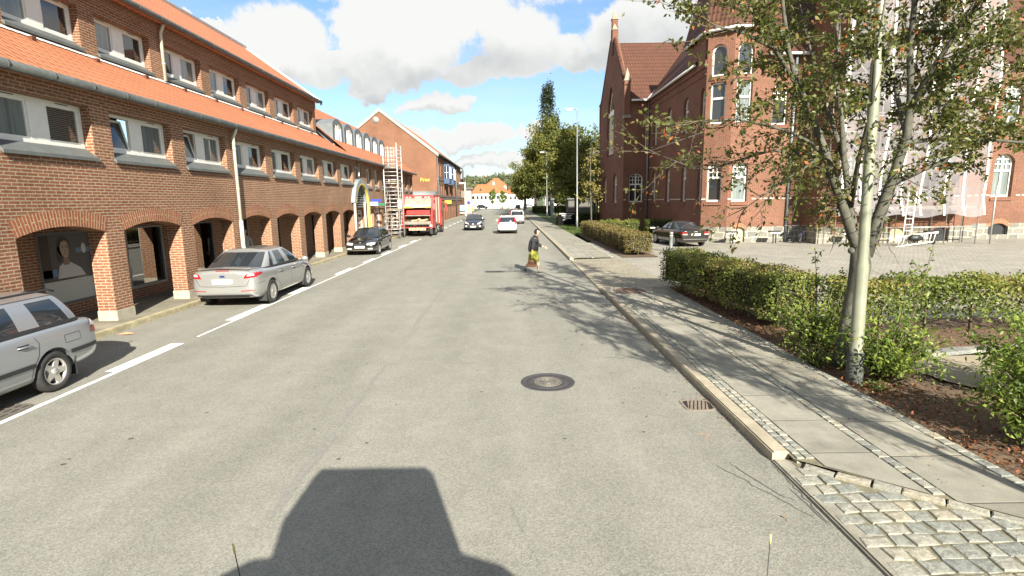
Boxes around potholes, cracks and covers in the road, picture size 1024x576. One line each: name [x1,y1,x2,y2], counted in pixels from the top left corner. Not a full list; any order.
crack [716,464,828,524]
drain grate [0,403,35,421]
manhole cover [521,373,575,392]
drain grate [679,399,716,411]
